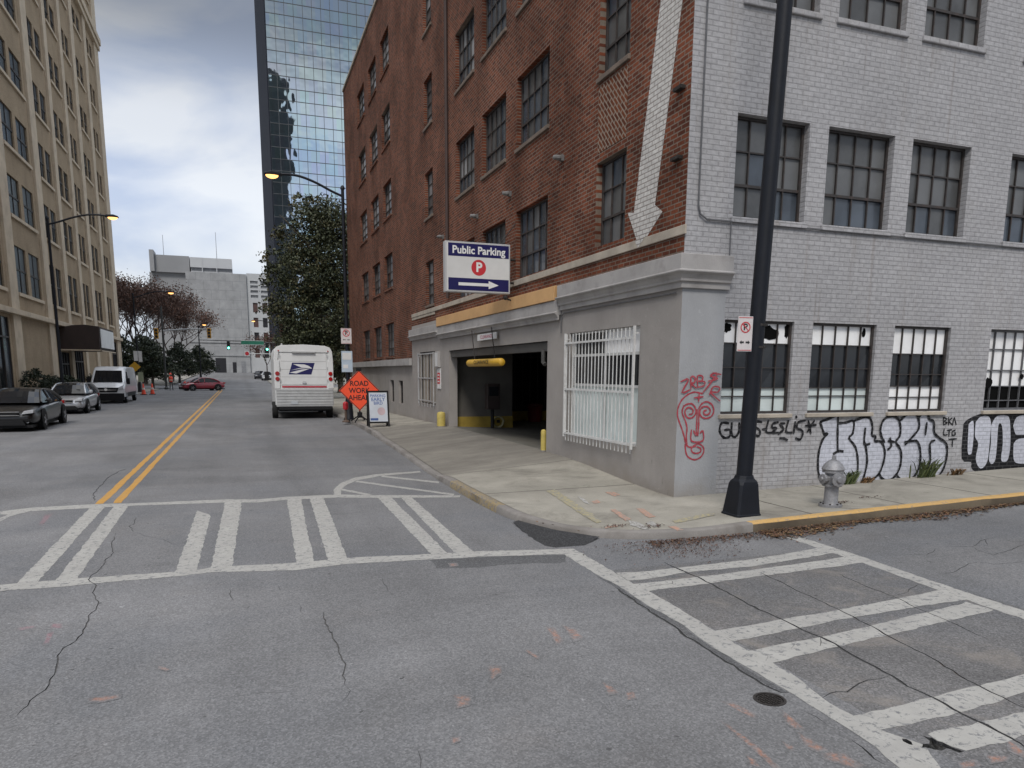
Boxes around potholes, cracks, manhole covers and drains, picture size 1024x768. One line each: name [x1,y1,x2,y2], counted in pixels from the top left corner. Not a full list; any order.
manhole cover [753,692,787,707]
pothole [922,736,964,753]
crack [942,537,1024,574]
crack [18,519,175,714]
crack [822,676,887,698]
crack [323,613,351,704]
